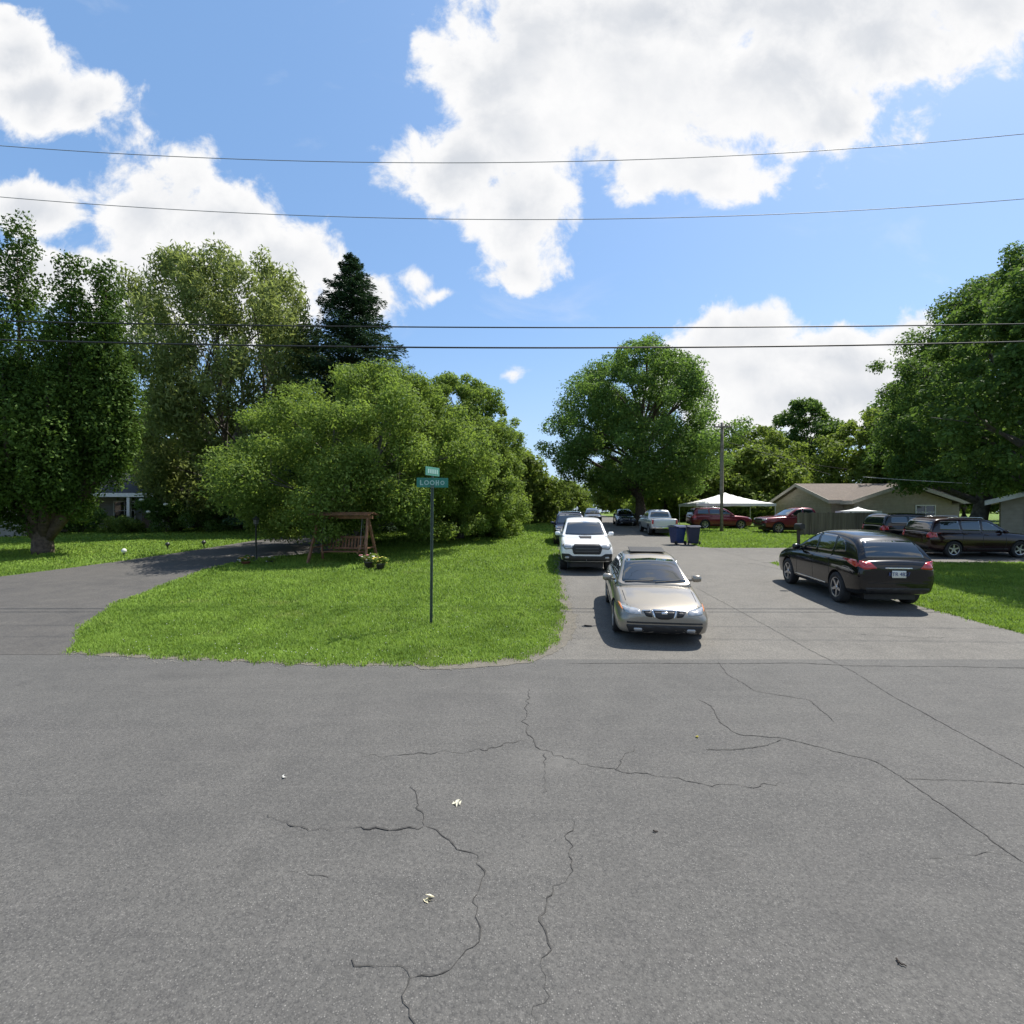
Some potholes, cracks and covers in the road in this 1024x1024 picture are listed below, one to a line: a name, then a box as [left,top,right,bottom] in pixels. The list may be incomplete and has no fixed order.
crack [368,689,789,790]
crack [700,700,1023,862]
crack [268,785,486,1024]
crack [718,662,833,721]
crack [532,822,575,1022]
